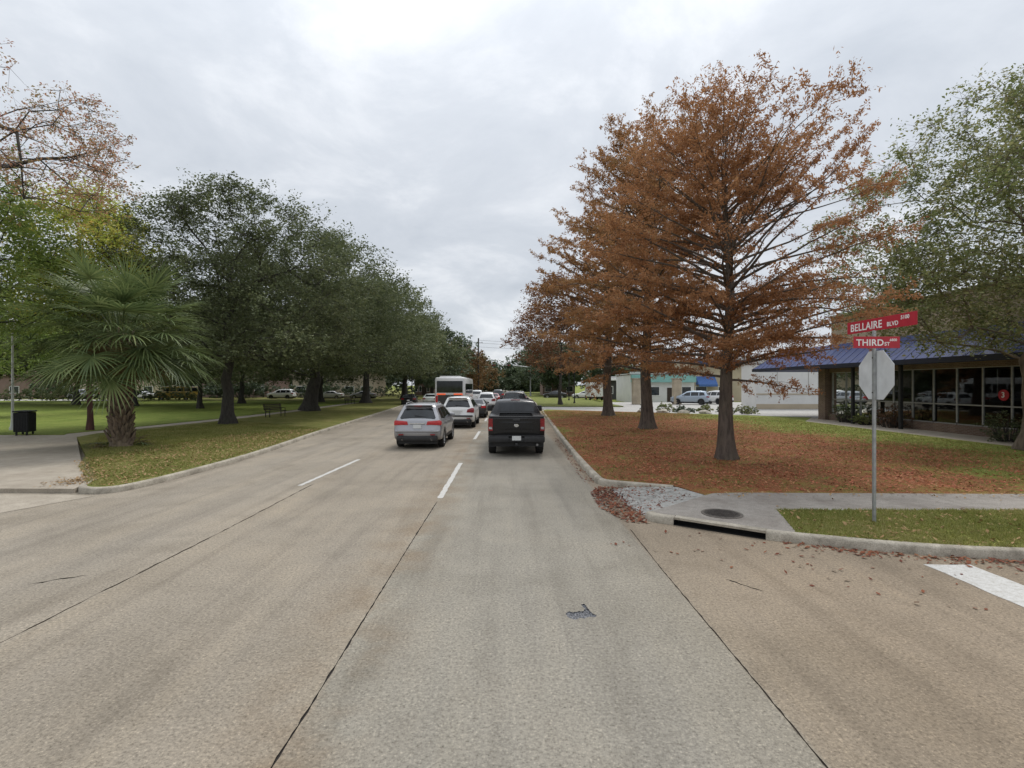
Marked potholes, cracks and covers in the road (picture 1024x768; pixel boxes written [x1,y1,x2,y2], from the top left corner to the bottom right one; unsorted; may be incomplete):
drain grate [674,515,767,540]
pothole [566,604,596,620]
manhole cover [701,509,744,519]
